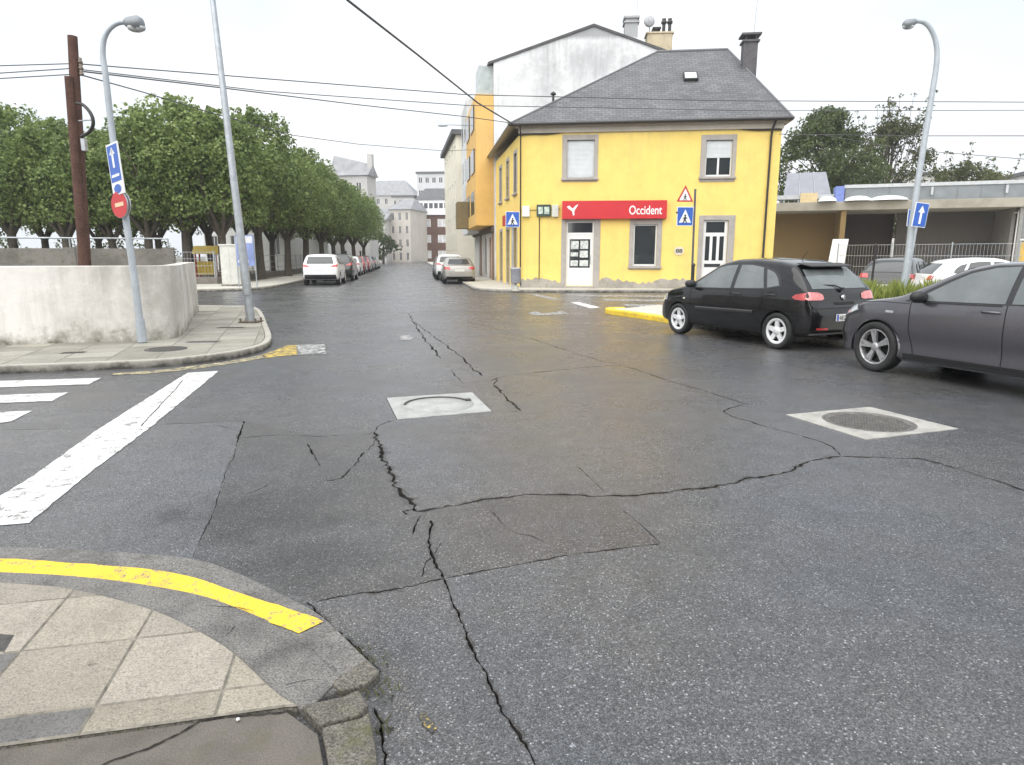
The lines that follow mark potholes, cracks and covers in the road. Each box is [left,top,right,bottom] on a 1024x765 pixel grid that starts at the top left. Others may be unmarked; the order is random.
crack [102,710,291,765]
manhole cover [786,407,958,440]
crack [245,315,1024,765]
manhole cover [387,392,492,420]
